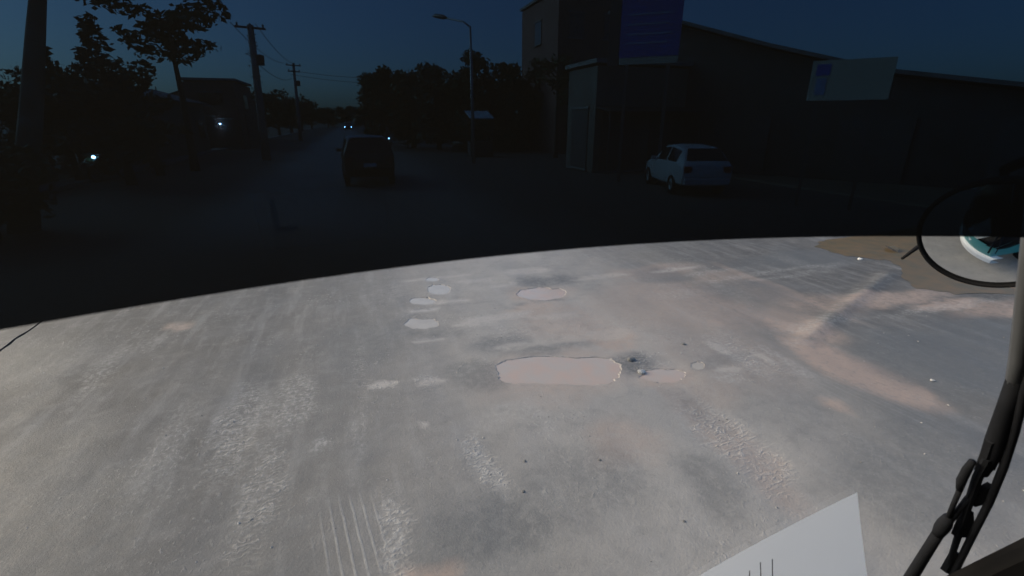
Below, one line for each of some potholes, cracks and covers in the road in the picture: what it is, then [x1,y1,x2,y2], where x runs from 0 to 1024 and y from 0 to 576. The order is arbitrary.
pothole [516,287,566,301]
pothole [404,318,439,329]
pothole [427,284,451,295]
pothole [638,368,686,383]
pothole [494,356,622,385]
pothole [409,297,437,305]
